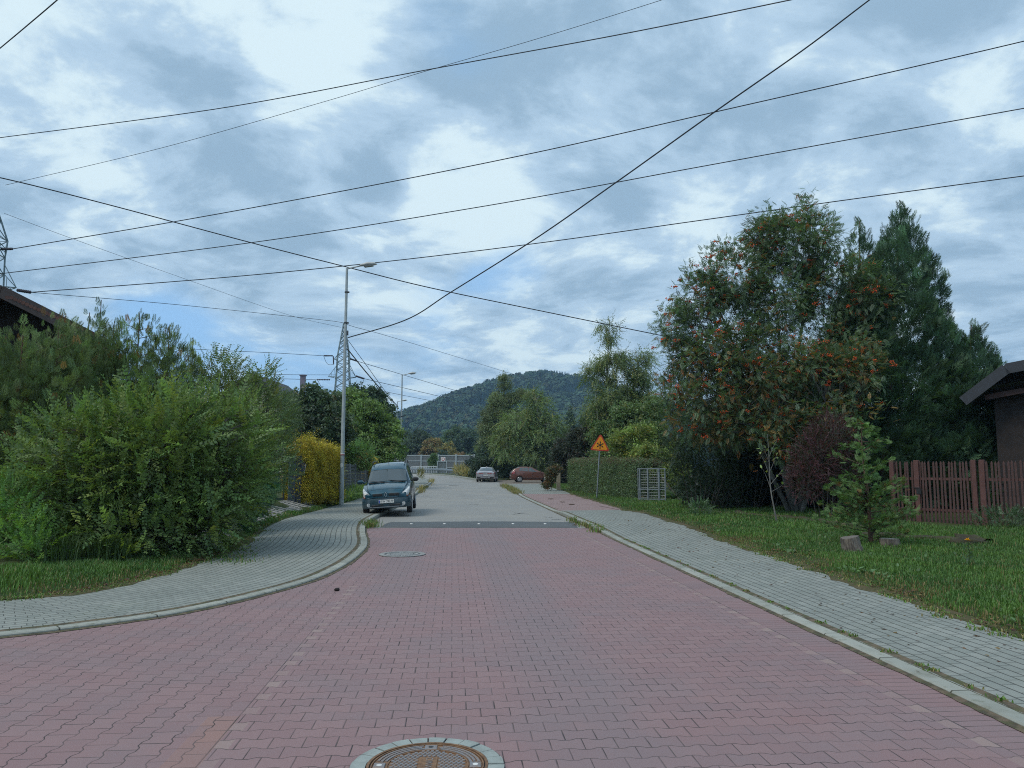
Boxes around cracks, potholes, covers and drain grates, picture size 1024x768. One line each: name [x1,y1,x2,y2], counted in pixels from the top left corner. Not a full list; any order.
manhole cover [349,737,505,768]
